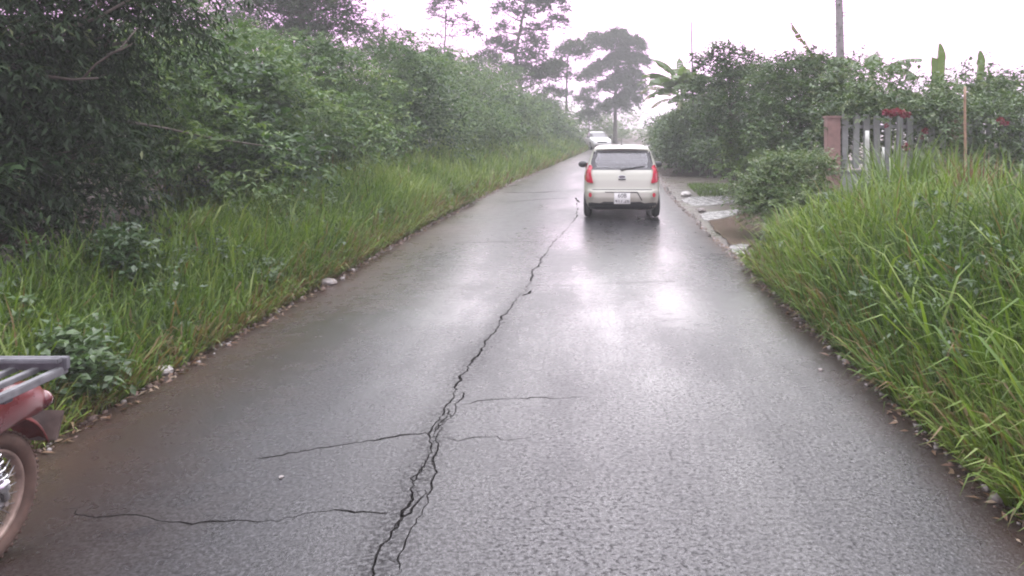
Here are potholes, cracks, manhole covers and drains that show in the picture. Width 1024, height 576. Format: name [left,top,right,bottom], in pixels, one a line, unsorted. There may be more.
crack [70,185,580,576]
